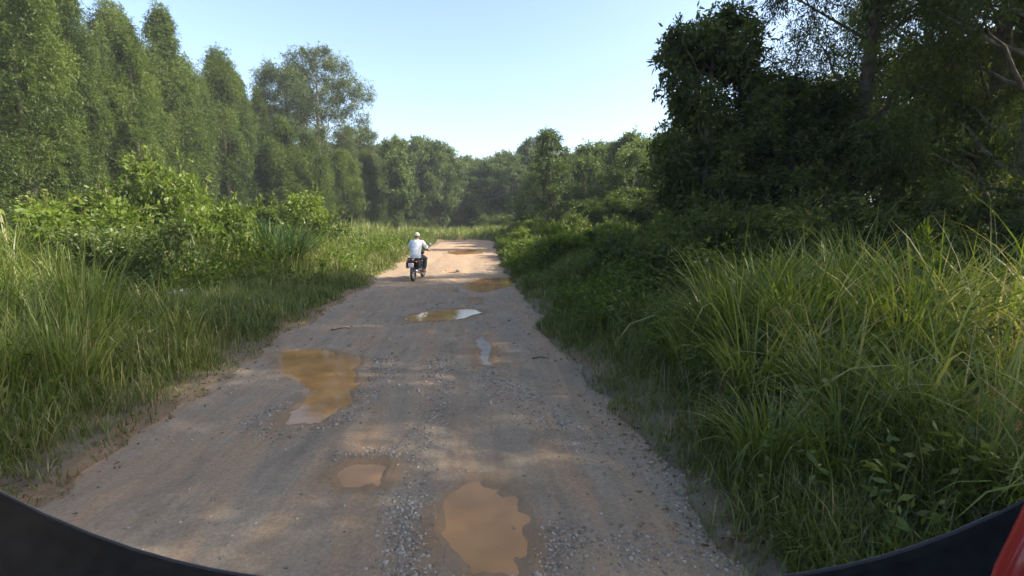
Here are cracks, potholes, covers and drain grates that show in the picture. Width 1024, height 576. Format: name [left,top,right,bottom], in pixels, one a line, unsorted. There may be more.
pothole [430,472,541,576]
pothole [264,347,367,429]
pothole [400,308,485,322]
pothole [471,334,498,366]
pothole [463,276,515,292]
pothole [322,457,397,496]
